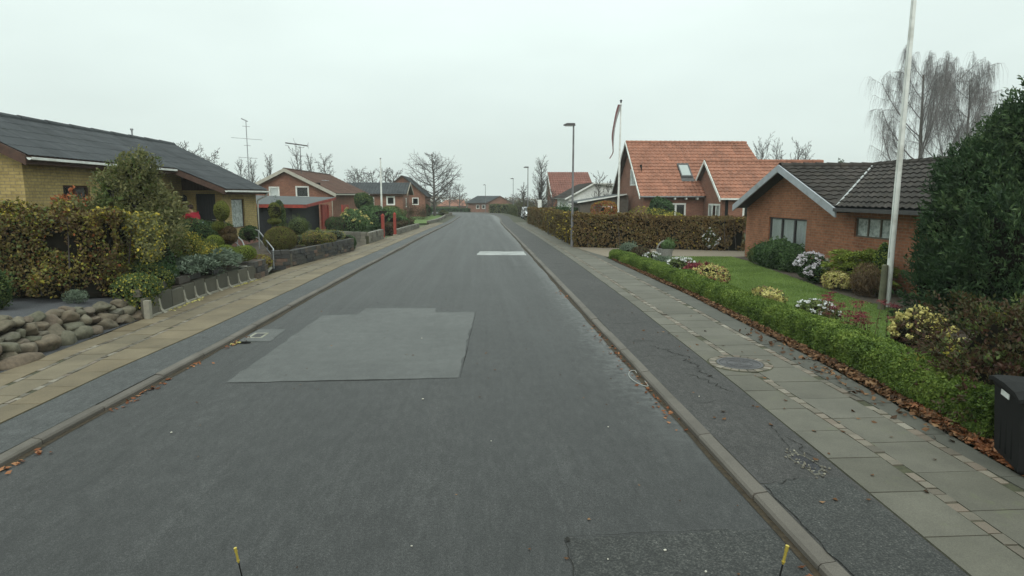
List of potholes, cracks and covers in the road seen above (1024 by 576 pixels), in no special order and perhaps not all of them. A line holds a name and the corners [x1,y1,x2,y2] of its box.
manhole cover [707,355,774,373]
crack [632,341,733,403]
